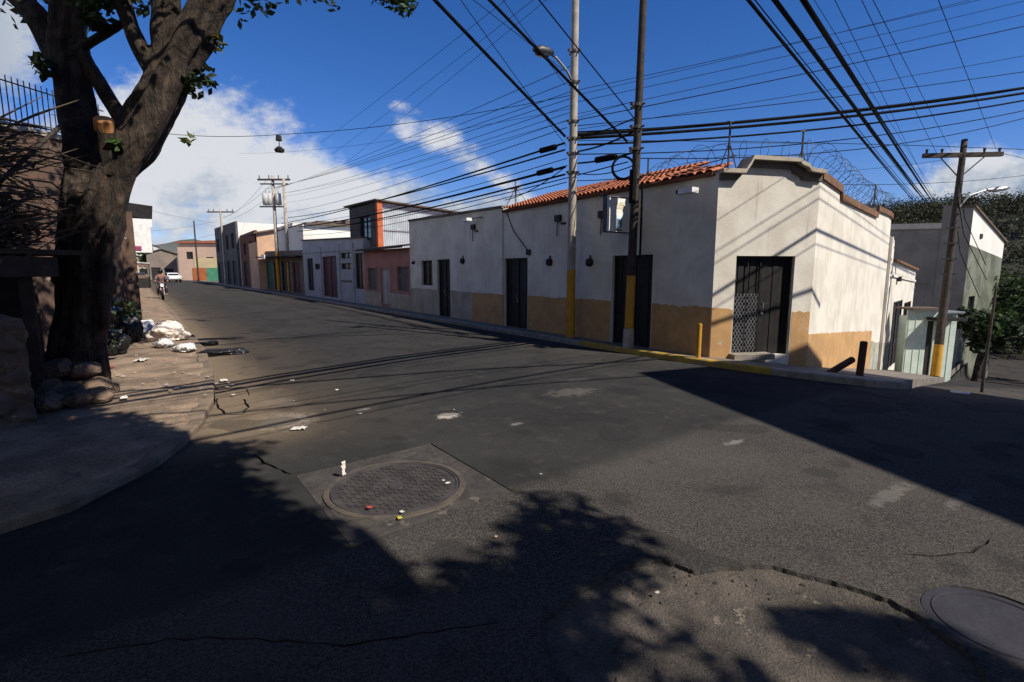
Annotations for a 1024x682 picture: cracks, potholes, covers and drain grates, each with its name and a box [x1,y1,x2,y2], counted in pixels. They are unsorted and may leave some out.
crack [254,455,306,474]
crack [906,539,990,557]
manhole cover [910,581,1024,671]
manhole cover [296,443,512,547]
crack [215,387,249,415]
